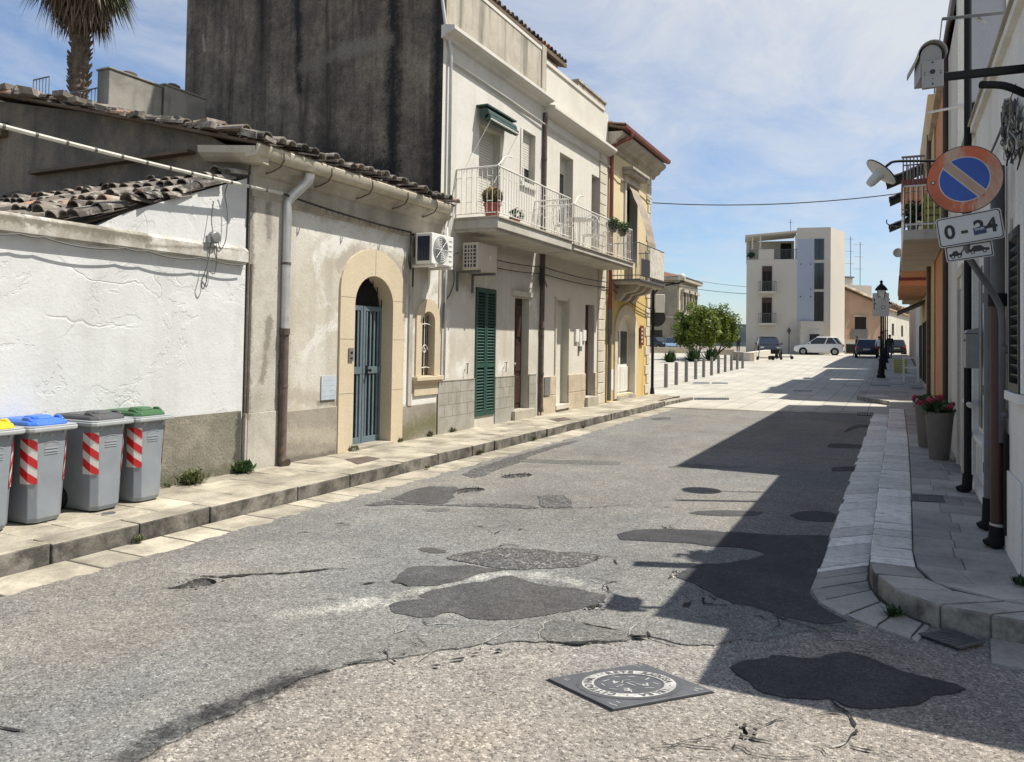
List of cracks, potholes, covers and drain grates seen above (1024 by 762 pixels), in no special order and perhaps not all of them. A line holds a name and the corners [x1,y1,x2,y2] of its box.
crack [316,611,679,672]
manhole cover [547,663,715,712]
drain grate [918,629,985,649]
pothole [168,576,225,590]
drain grate [911,494,945,503]
crack [642,698,874,758]
crack [191,568,373,599]
